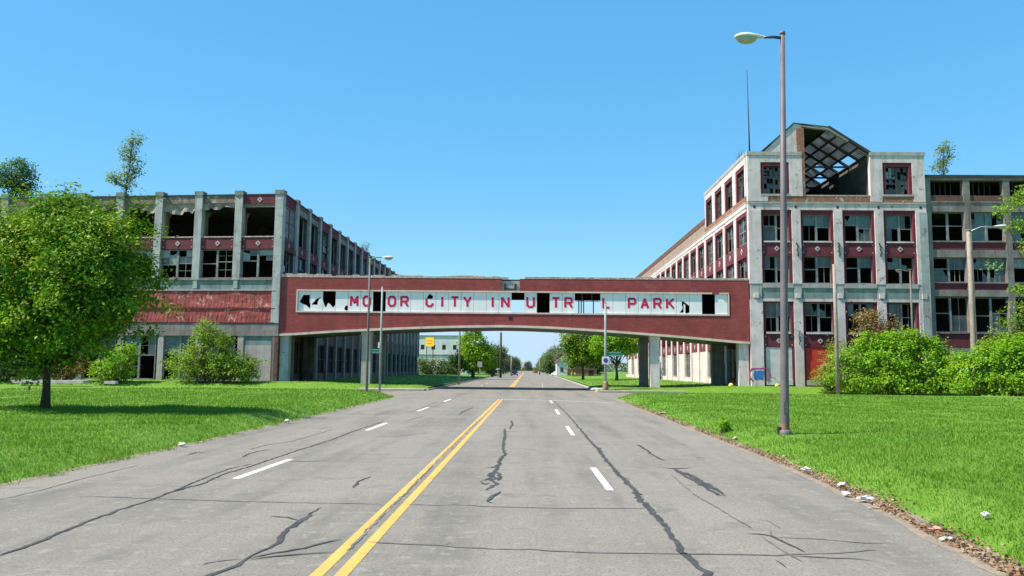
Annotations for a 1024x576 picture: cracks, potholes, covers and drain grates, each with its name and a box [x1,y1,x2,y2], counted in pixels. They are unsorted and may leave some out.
crack [418,421,644,508]
crack [0,465,375,576]
